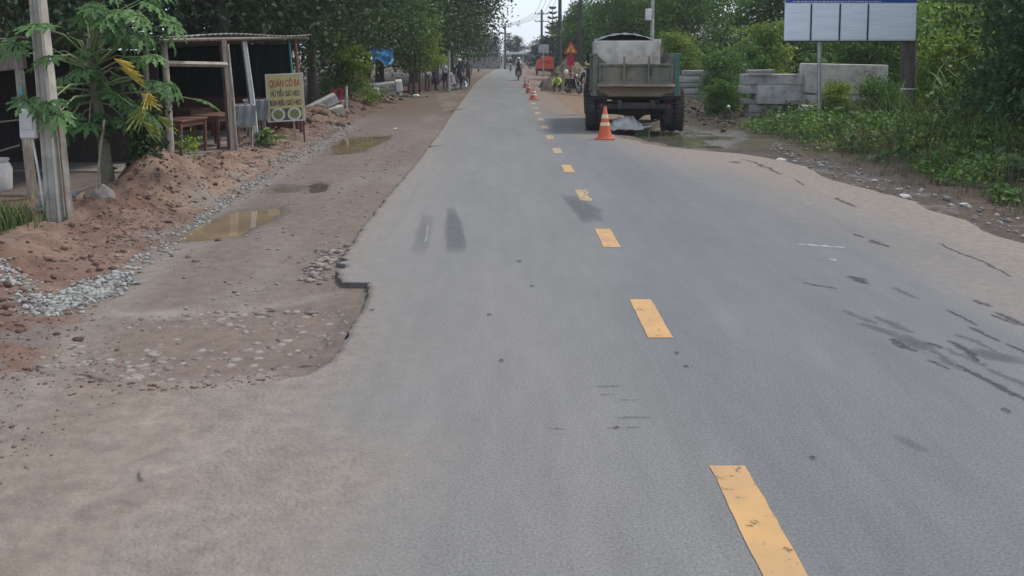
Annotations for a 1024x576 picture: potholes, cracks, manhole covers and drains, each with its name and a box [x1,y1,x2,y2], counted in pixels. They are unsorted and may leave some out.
crack [940,243,1009,276]
pothole [323,134,394,156]
pothole [164,204,296,244]
